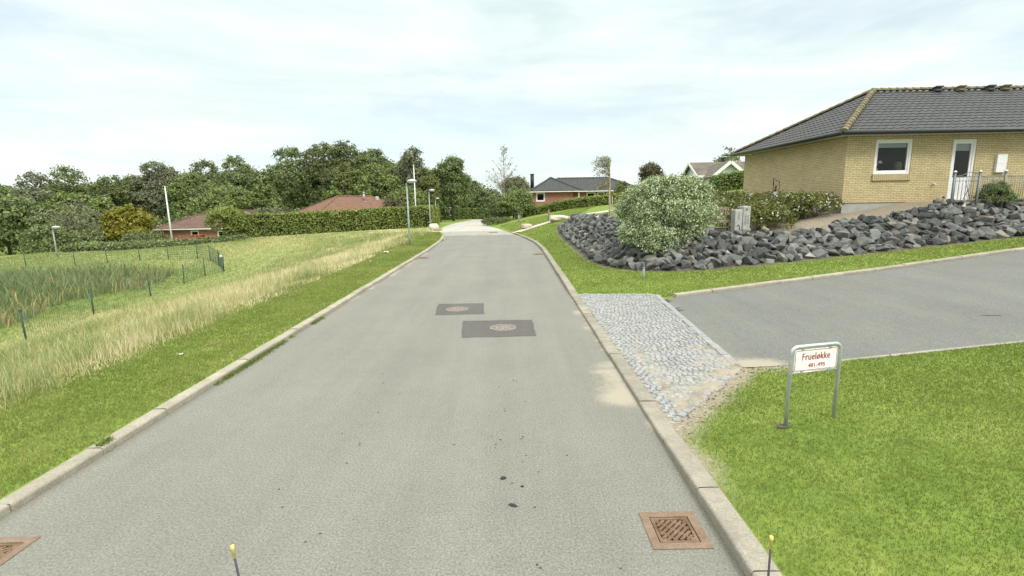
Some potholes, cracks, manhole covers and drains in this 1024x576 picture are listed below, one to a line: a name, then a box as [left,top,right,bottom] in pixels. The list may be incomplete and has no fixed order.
drain grate [639,511,714,550]
drain grate [0,536,41,566]
